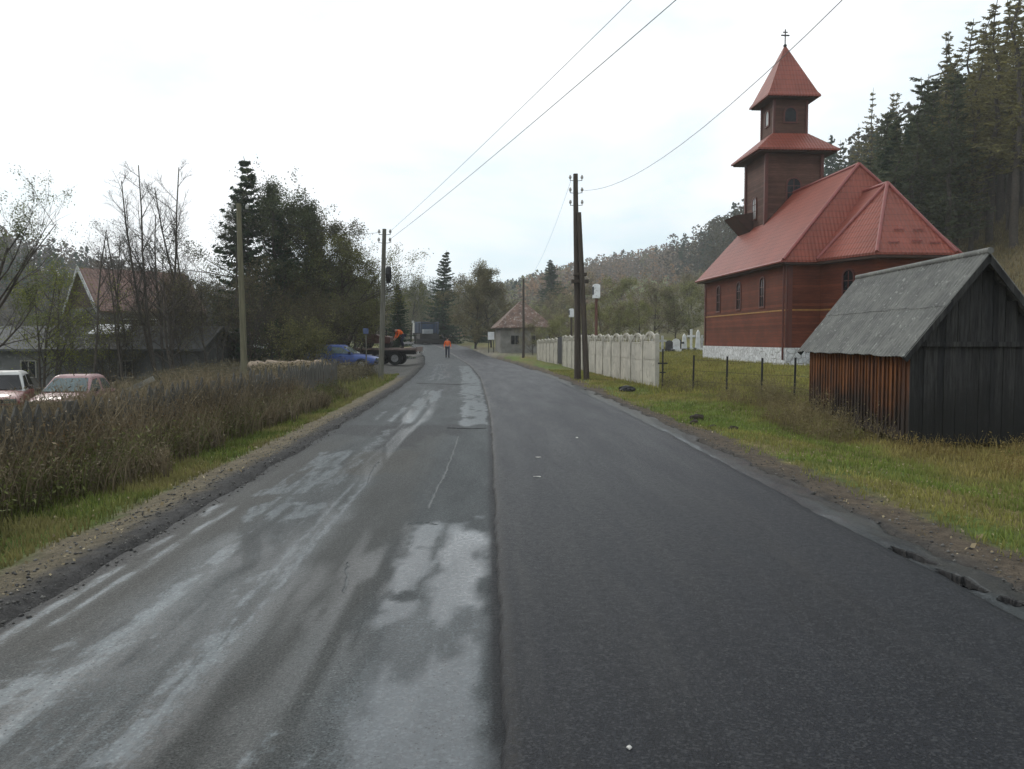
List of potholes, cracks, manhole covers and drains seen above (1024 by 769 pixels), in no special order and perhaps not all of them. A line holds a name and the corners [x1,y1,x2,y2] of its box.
pothole [935,568,988,592]
crack [342,563,350,593]
pothole [891,546,939,566]
pothole [997,595,1024,607]
